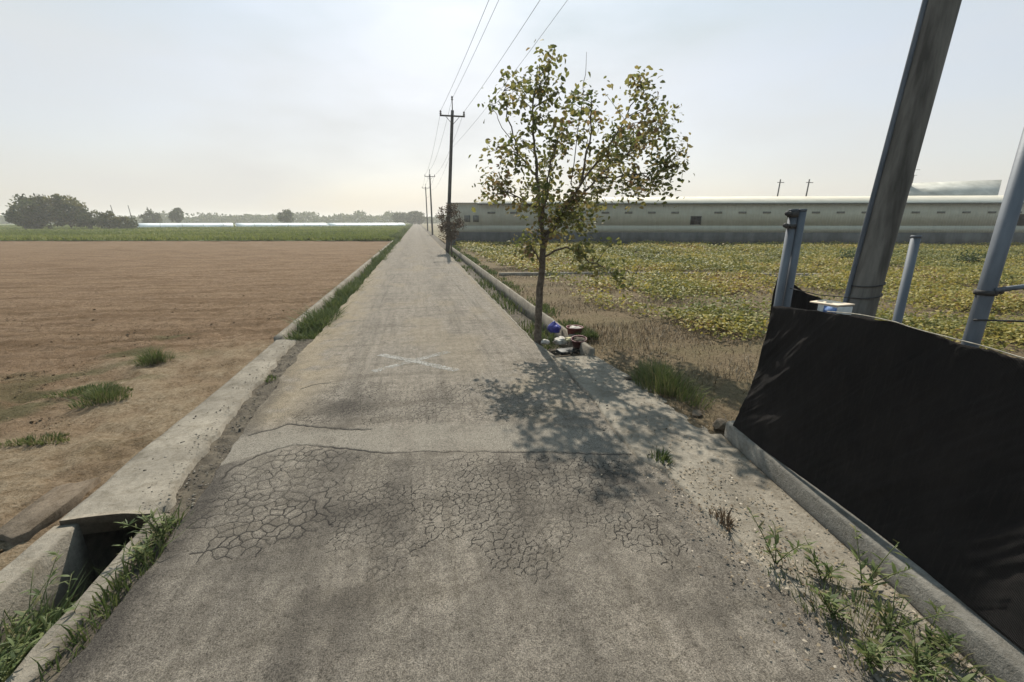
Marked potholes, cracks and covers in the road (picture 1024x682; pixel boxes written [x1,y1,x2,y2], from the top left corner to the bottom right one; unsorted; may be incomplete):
crack [186,381,688,584]
